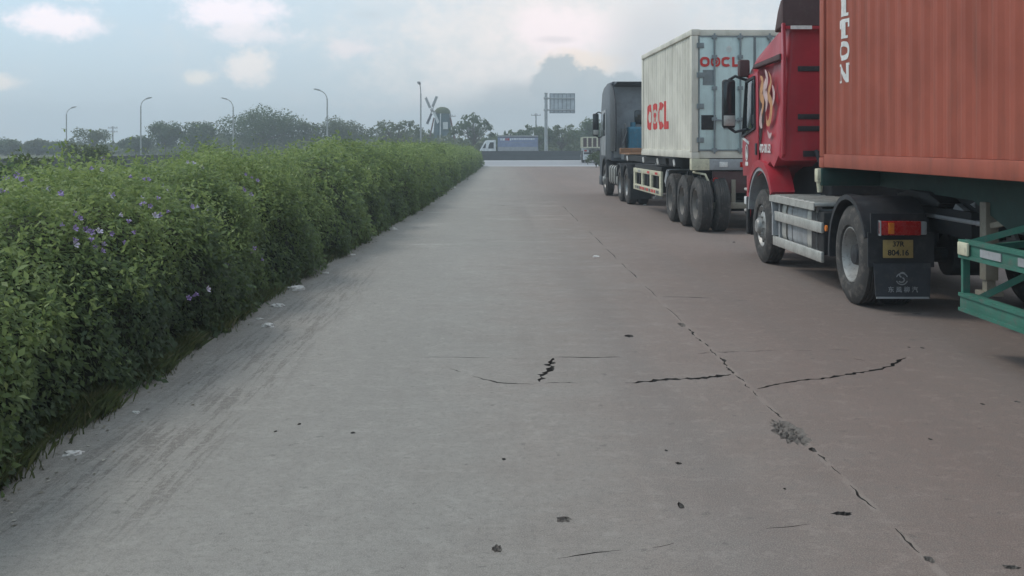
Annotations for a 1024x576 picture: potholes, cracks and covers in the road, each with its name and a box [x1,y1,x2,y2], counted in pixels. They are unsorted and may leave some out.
pothole [770,419,812,446]
crack [456,357,604,384]
crack [564,543,673,558]
crack [565,208,918,552]
